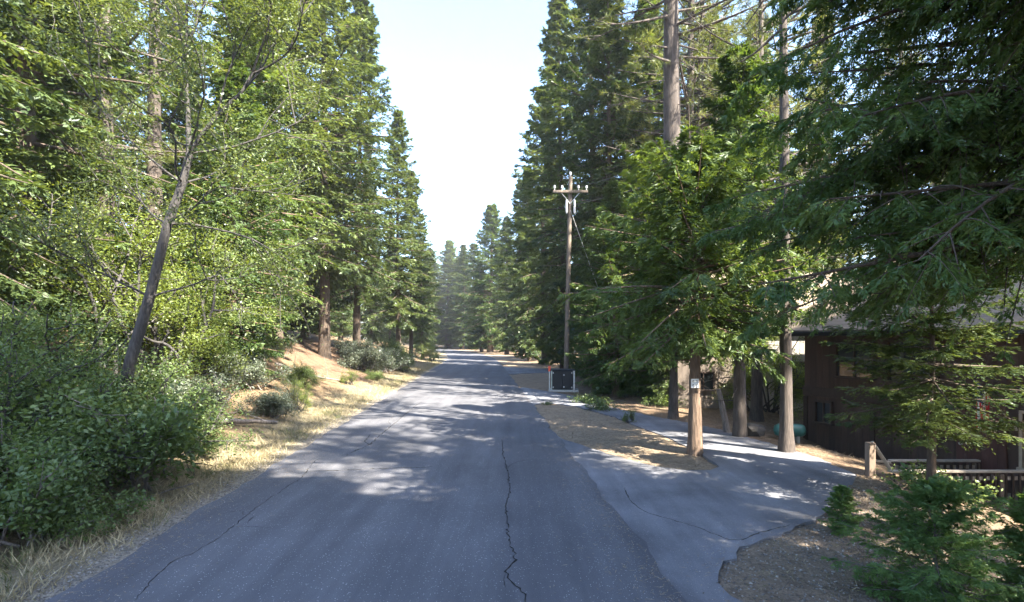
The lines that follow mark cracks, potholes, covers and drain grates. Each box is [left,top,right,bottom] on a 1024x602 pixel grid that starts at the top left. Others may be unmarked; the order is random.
crack [349,405,416,454]
crack [624,488,790,540]
crack [501,441,527,602]
crack [135,460,420,600]
